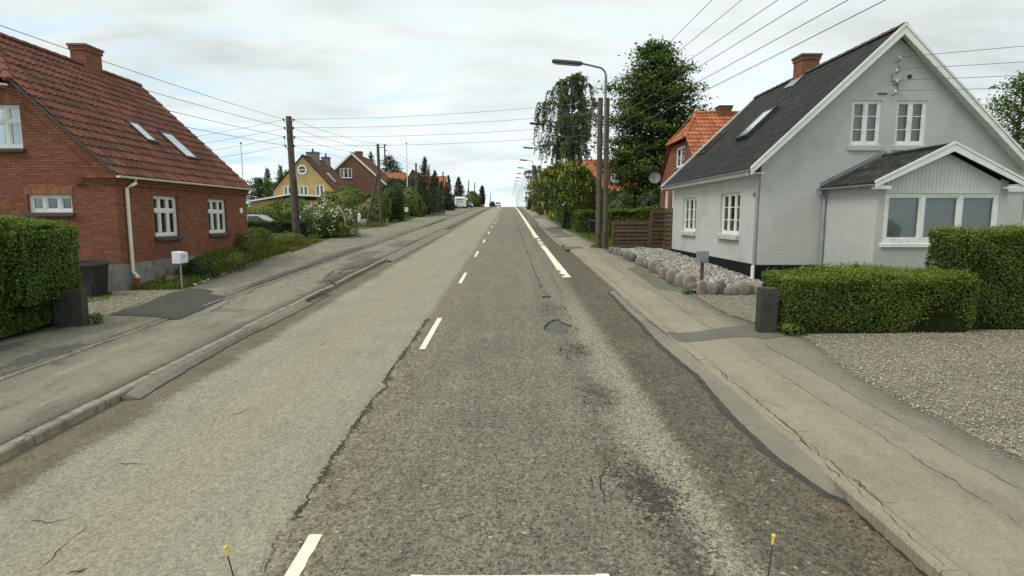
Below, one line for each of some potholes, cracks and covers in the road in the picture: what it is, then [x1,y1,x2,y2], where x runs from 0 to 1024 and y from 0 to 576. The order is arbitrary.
crack [590,459,659,534]
crack [515,217,590,358]
crack [28,518,94,575]
pothole [544,319,572,335]
